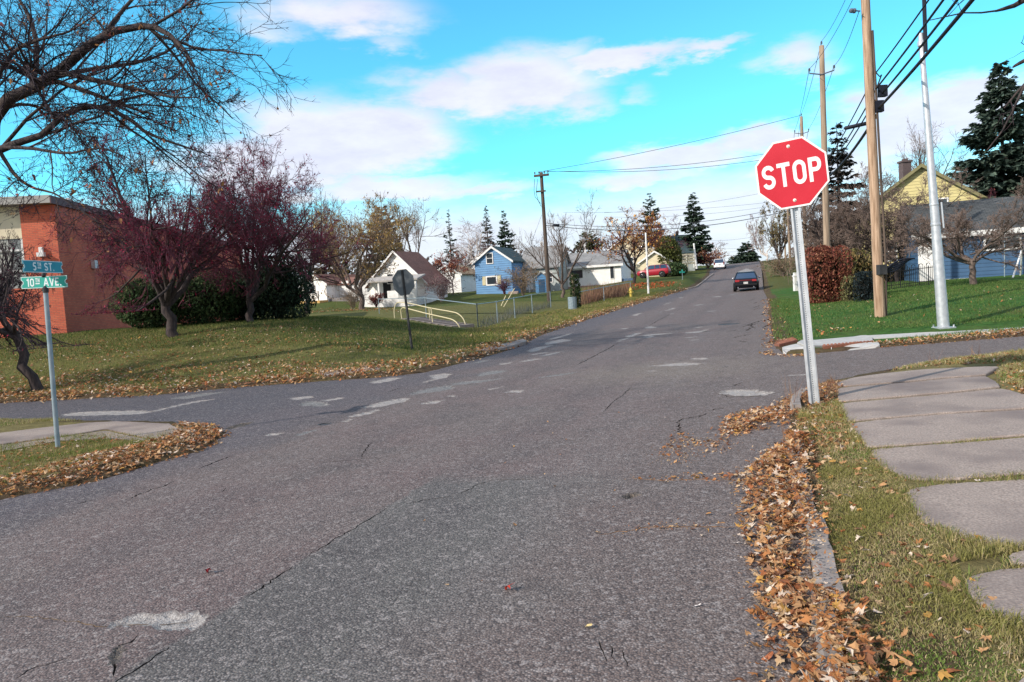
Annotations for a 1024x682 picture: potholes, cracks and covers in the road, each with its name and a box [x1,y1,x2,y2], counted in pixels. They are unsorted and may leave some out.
crack [669,382,781,441]
crack [1,616,196,676]
crack [599,641,628,665]
